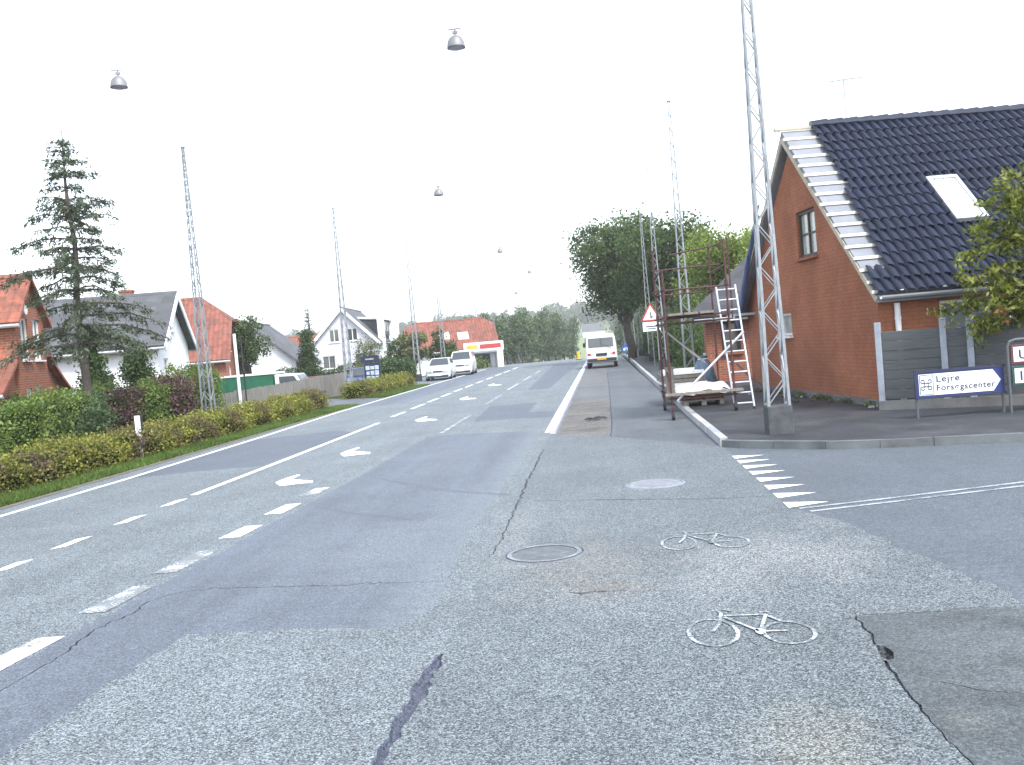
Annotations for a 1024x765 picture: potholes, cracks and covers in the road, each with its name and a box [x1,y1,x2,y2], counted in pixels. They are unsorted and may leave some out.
crack [854,606,1024,765]
pothole [876,645,894,663]
crack [372,654,443,765]
manhole cover [626,479,685,489]
manhole cover [502,544,587,564]
crack [489,449,759,557]
